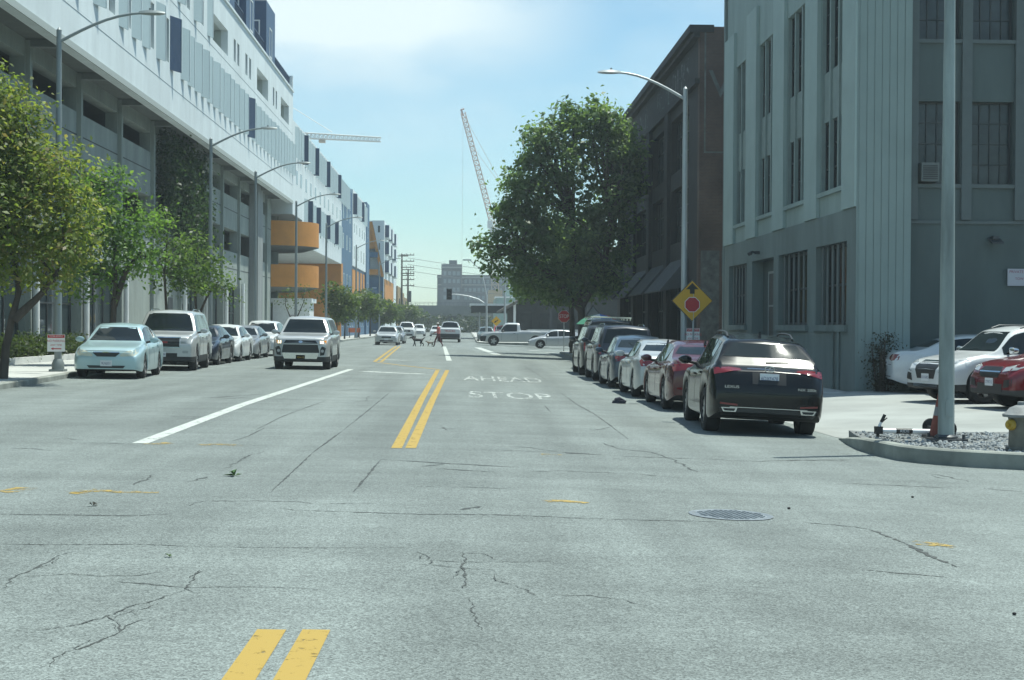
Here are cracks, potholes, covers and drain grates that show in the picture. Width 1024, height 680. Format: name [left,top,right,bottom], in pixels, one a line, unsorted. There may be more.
crack [4,544,548,666]
manhole cover [688,509,773,521]
crack [192,388,718,522]
crack [526,367,698,477]
